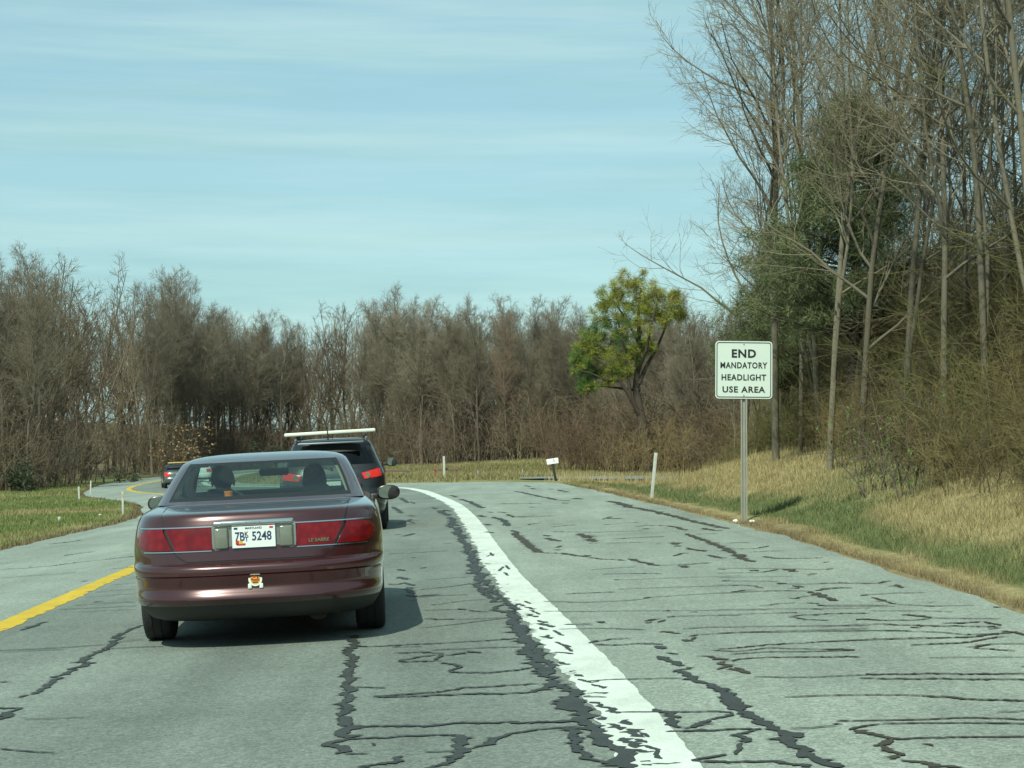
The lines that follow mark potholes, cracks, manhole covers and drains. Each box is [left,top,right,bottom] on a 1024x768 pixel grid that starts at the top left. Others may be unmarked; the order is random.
crack [0,540,155,719]
crack [321,485,1024,768]
